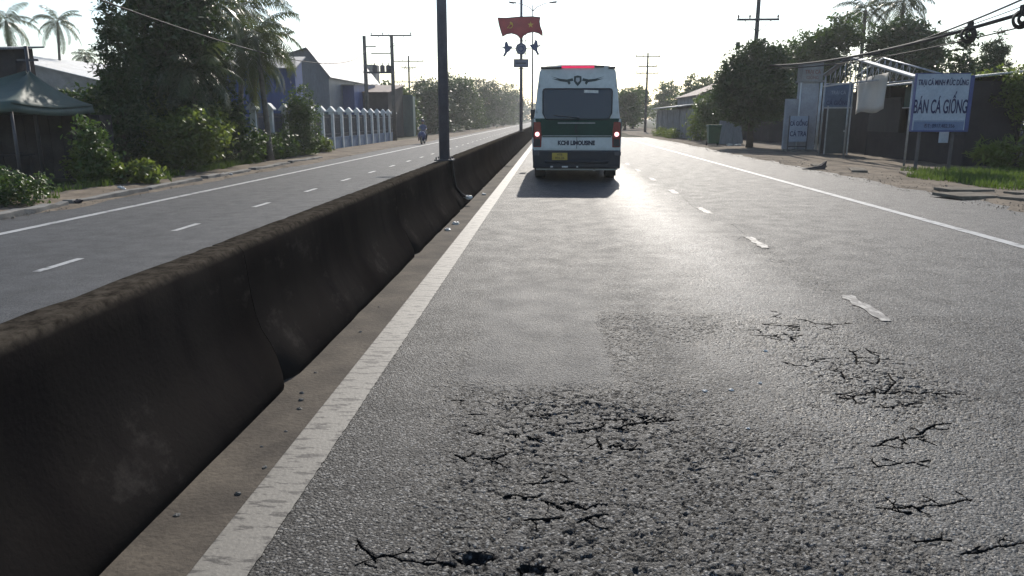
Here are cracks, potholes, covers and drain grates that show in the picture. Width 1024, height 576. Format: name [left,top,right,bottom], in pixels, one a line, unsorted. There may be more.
crack [355,540,456,568]
crack [451,400,609,529]
pothole [517,565,558,575]
crack [876,491,972,515]
crack [756,311,966,468]
pothole [452,551,495,566]
crack [912,532,1024,555]
crack [577,416,678,451]
